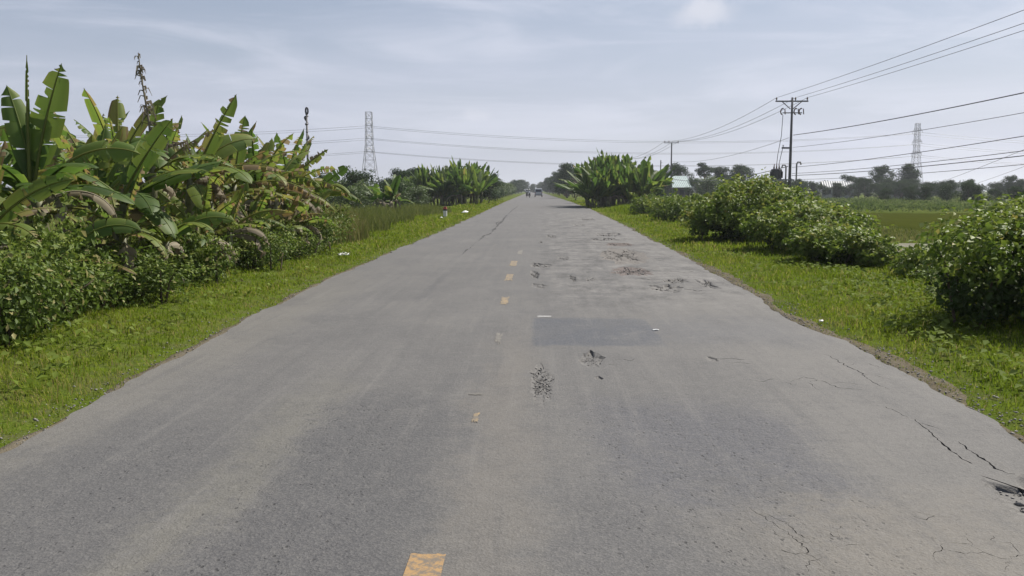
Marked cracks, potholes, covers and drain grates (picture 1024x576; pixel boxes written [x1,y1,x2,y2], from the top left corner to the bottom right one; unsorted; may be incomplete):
crack [924,516,1018,569]
crack [892,409,1011,474]
pothole [611,267,653,276]
pothole [599,248,649,265]
pothole [648,284,684,293]
pothole [529,362,555,409]
pothole [982,474,1024,516]
pothole [694,279,722,290]
crack [463,208,515,254]
crack [754,511,853,567]
pothole [578,350,606,368]
